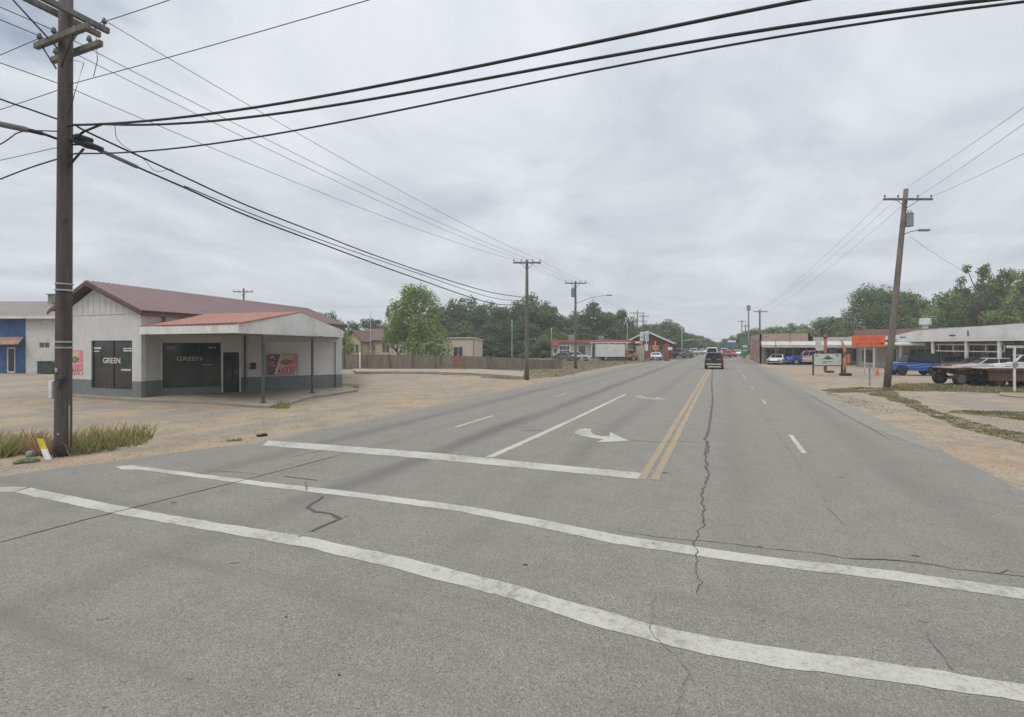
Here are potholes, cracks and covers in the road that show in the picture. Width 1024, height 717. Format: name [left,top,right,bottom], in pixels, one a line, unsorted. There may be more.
crack [624,369,1024,594]
crack [927,632,961,675]
crack [649,596,695,717]
